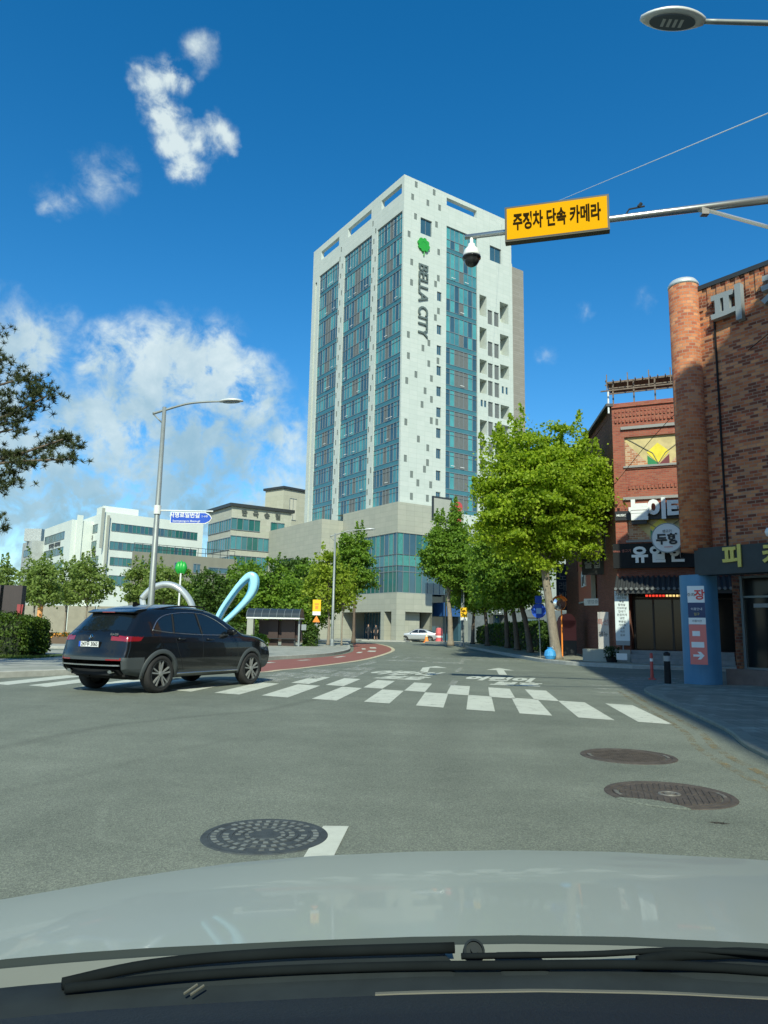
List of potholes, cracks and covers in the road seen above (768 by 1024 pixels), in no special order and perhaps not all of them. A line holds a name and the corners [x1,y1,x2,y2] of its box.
manhole cover [604,781,739,810]
manhole cover [580,748,678,765]
manhole cover [200,819,328,855]
